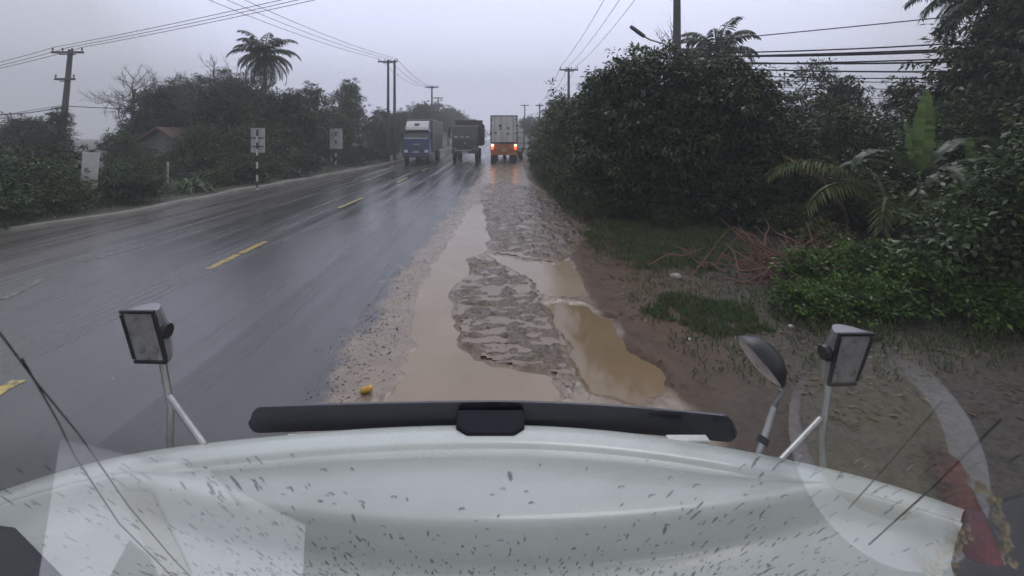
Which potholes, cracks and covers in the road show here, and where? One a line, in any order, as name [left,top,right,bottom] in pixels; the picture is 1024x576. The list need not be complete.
pothole [538,299,683,408]
pothole [485,252,595,299]
